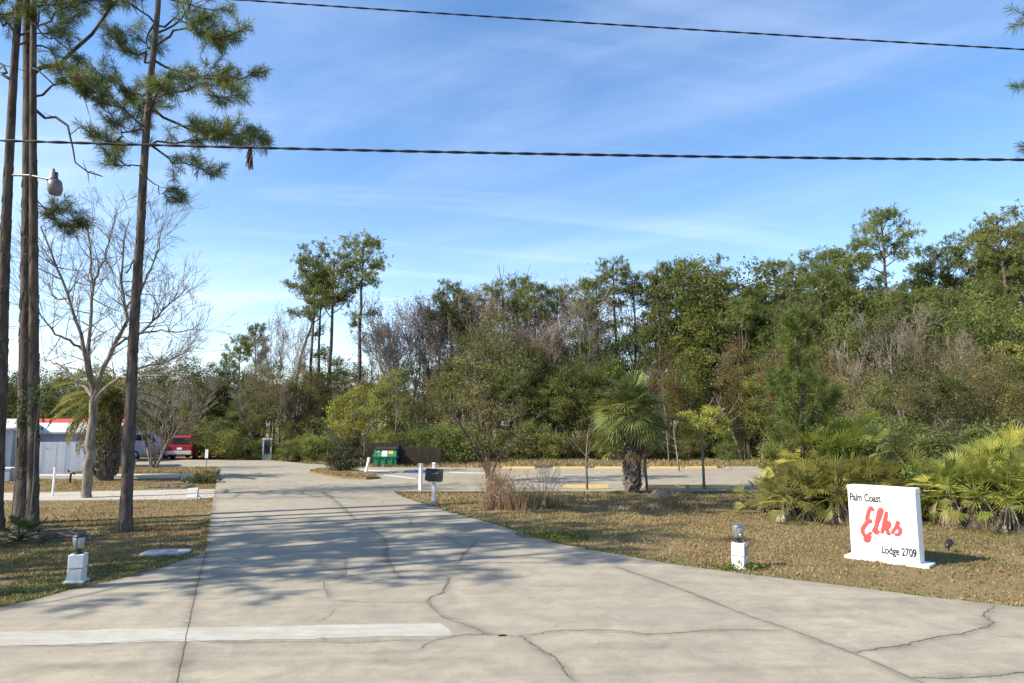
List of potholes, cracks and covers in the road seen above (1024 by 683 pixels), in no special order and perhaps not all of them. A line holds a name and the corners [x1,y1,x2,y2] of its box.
crack [7,533,495,649]
crack [859,605,1003,652]
